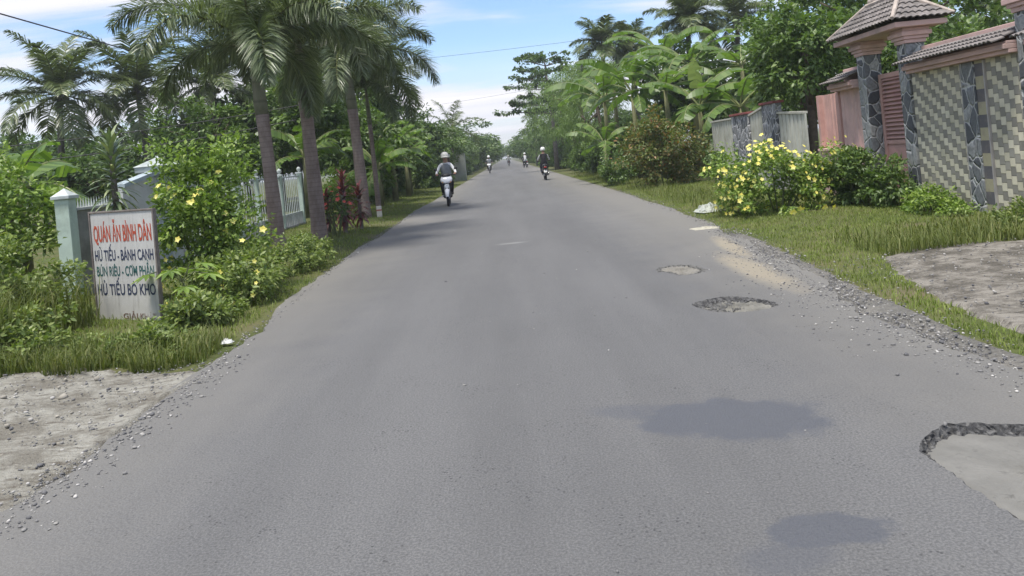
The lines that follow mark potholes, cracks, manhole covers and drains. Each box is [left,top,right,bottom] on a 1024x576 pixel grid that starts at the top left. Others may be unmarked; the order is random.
pothole [692,296,778,312]
pothole [919,422,1024,521]
pothole [657,265,708,275]
